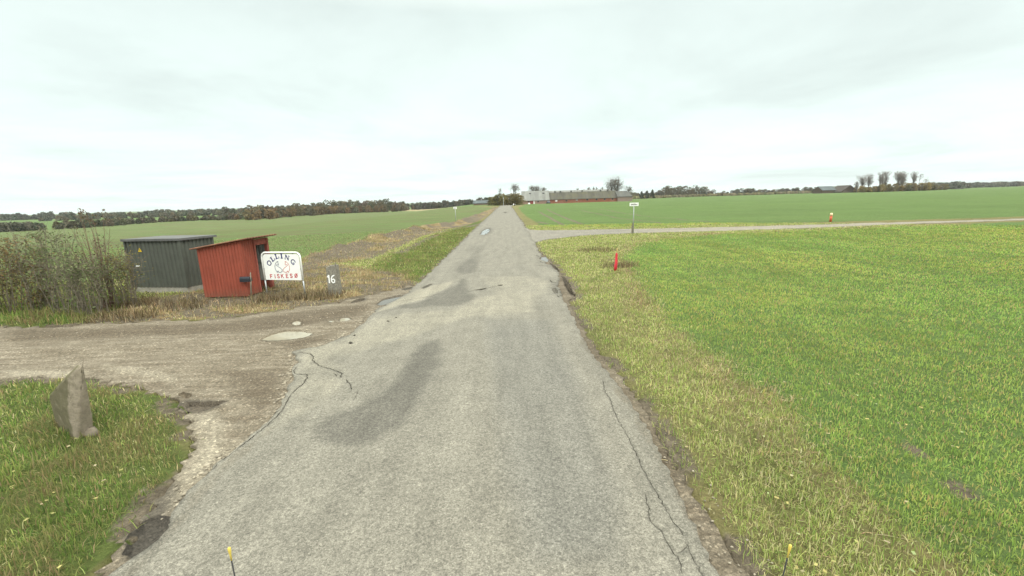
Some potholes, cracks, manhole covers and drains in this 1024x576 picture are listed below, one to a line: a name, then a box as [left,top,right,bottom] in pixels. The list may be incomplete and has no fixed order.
crack [603,382,703,576]
pothole [377,296,402,305]
crack [211,352,358,471]
